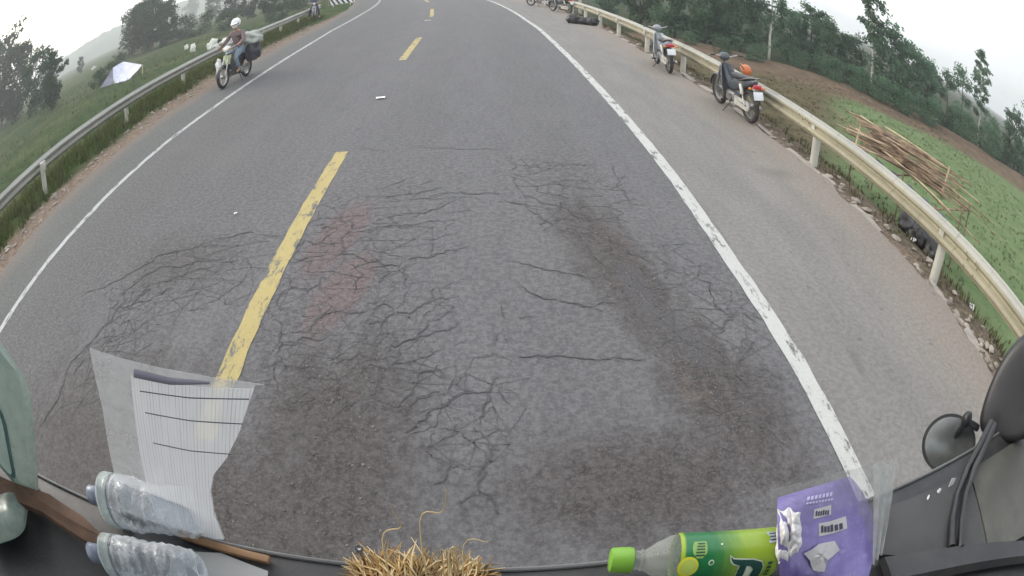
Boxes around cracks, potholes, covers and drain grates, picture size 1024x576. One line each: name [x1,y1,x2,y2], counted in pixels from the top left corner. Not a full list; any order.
crack [504,156,642,243]
crack [251,179,527,514]
crack [619,233,788,446]
crack [38,231,276,427]
crack [494,255,643,363]
